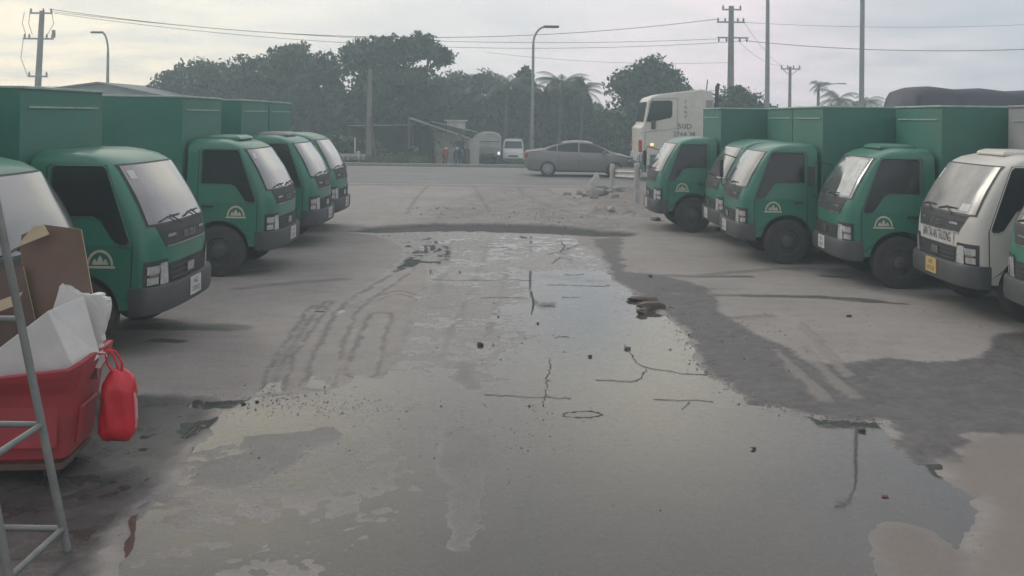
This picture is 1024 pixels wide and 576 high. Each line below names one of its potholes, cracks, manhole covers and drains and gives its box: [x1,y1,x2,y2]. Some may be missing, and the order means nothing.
crack [596,344,713,410]
